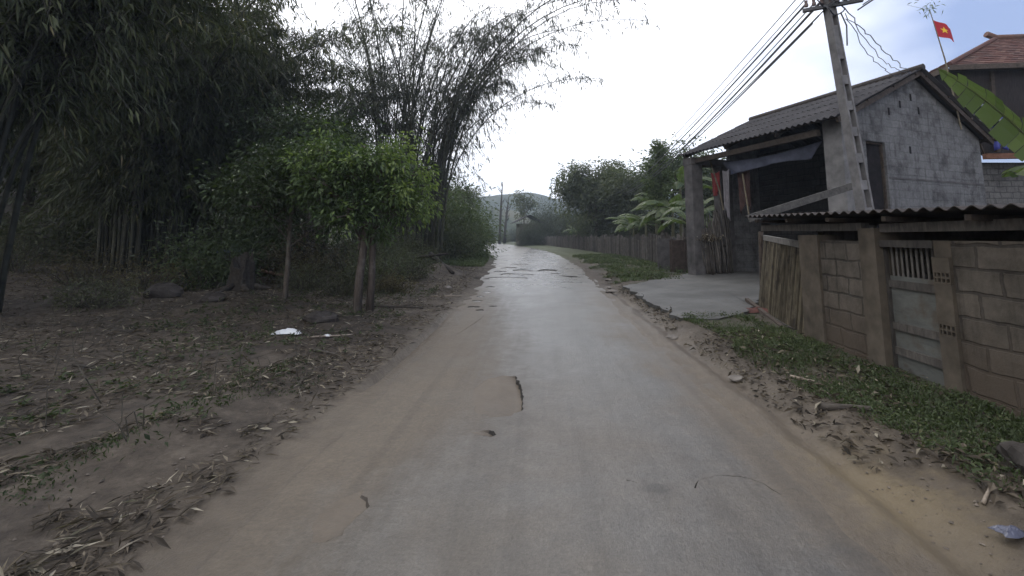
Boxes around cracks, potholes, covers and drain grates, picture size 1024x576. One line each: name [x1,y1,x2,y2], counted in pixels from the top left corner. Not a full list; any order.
pothole [471,375,524,417]
